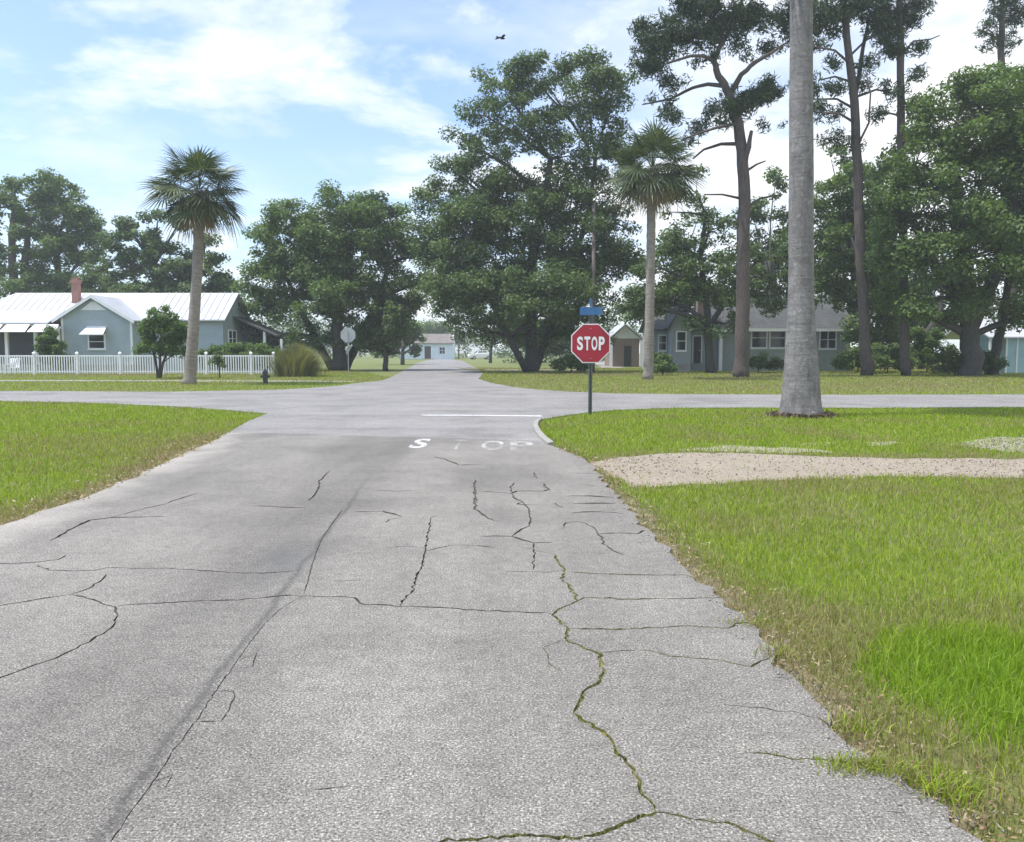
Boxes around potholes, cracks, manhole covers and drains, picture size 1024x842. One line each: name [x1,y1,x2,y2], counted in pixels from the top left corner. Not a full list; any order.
crack [0,457,774,842]
